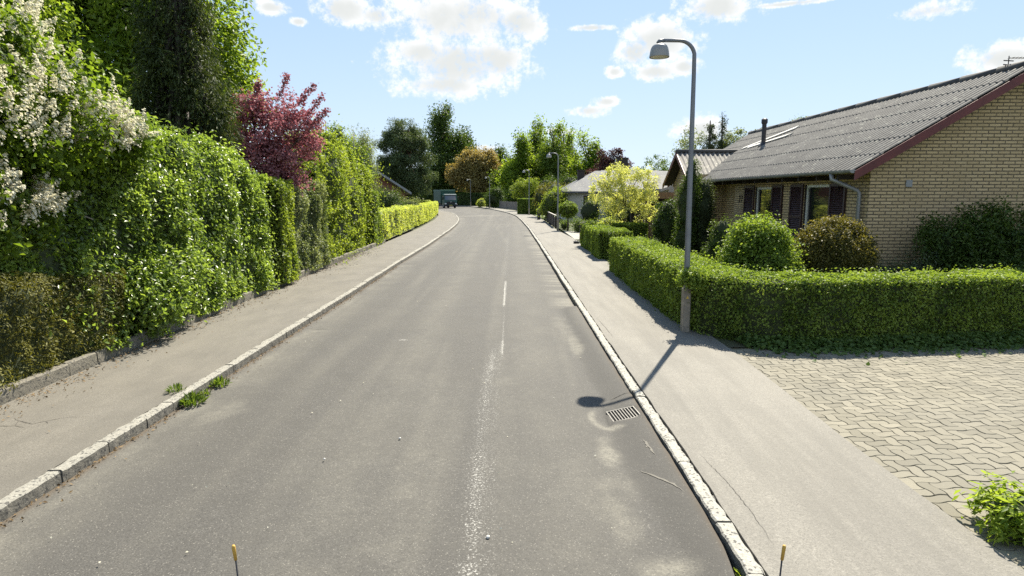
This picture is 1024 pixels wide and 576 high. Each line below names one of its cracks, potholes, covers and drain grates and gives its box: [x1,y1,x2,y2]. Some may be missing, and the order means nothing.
drain grate [606,406,640,421]
crack [641,471,682,490]
